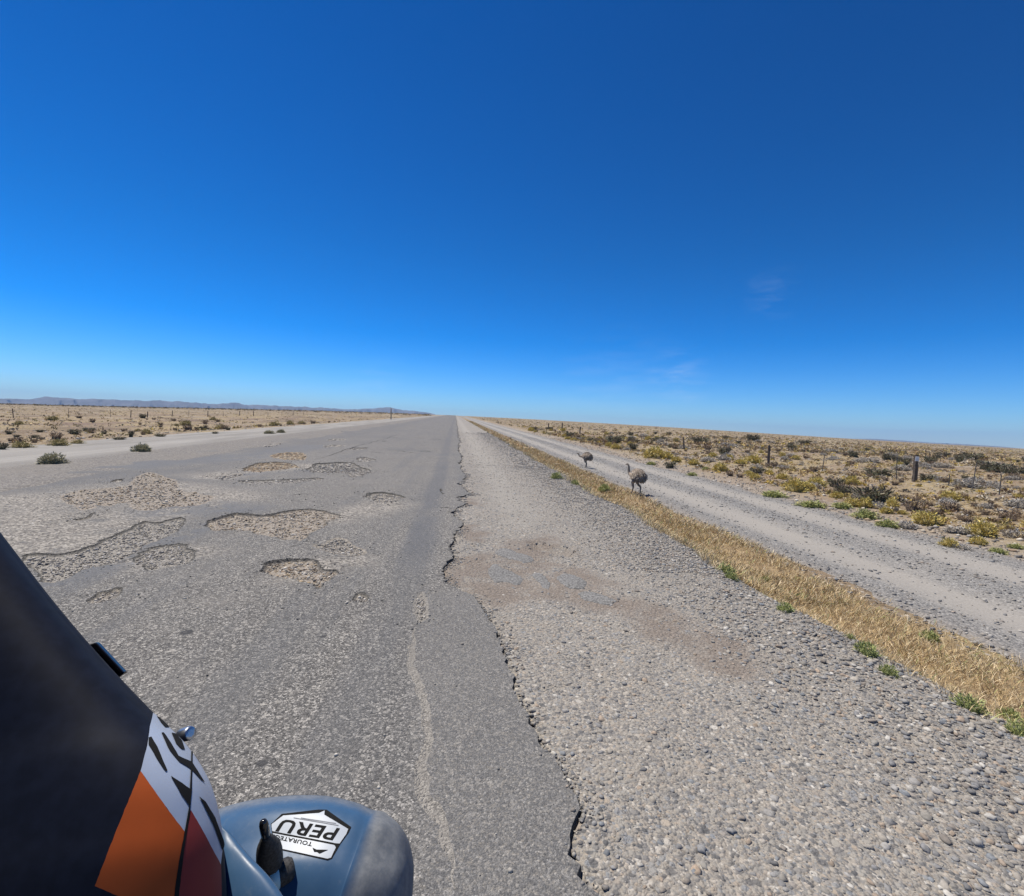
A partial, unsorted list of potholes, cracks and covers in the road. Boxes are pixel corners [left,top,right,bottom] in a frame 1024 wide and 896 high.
pothole [259,558,340,589]
crack [406,629,456,890]
pothole [312,538,367,556]
pothole [130,543,197,570]
pothole [270,452,306,460]
pothole [366,492,406,503]
pothole [241,462,300,472]
pothole [86,587,123,603]
pothole [60,472,216,511]
pothole [203,508,342,541]
pothole [21,517,186,583]
pothole [306,462,372,478]
